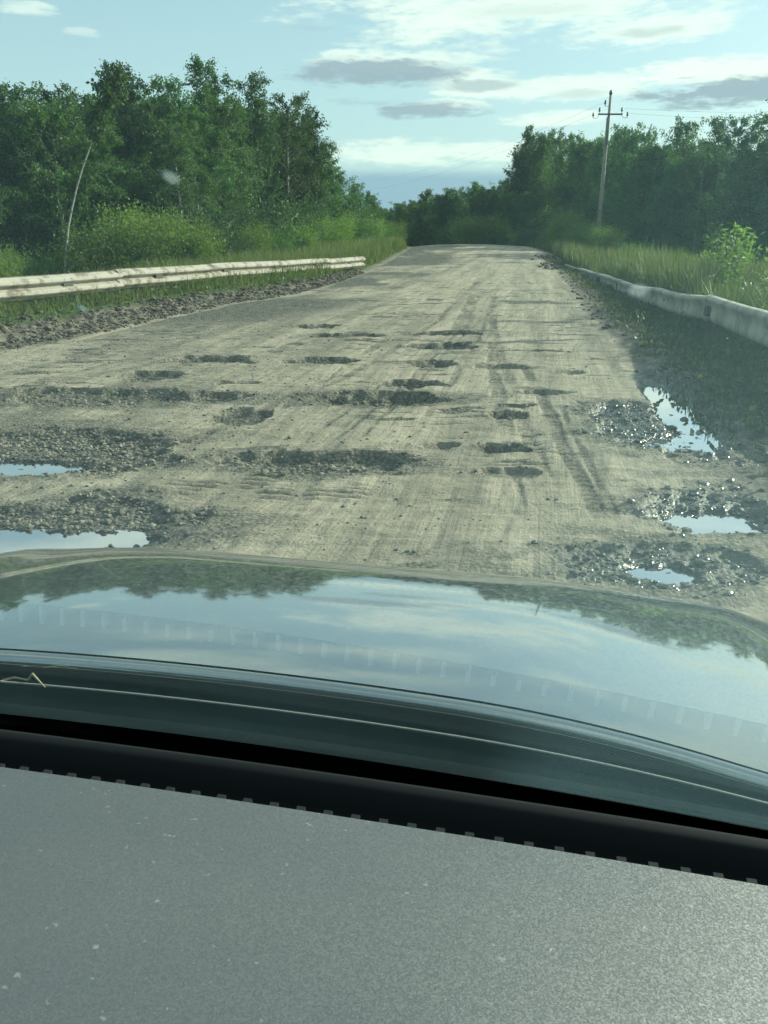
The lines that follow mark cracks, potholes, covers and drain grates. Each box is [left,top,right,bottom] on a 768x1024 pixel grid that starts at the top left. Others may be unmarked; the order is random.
pothole [0,385,261,407]
pothole [474,465,543,479]
pothole [485,409,530,421]
pothole [279,355,368,365]
pothole [474,441,539,454]
pothole [106,370,189,383]
pothole [202,407,275,427]
pothole [0,488,240,550]
pothole [296,389,467,408]
pothole [150,353,261,364]
pothole [566,399,767,468]
pothole [627,478,768,540]
